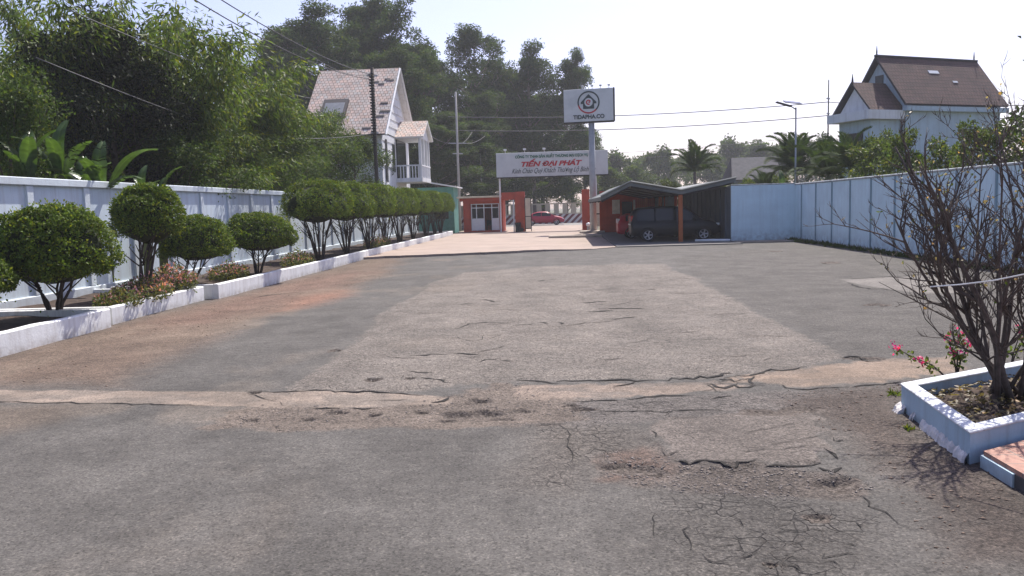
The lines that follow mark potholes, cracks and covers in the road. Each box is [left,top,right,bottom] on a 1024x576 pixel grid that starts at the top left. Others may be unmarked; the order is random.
crack [527,338,897,472]
crack [682,494,903,575]
pothole [595,463,631,476]
pothole [804,477,862,494]
pothole [608,464,671,478]
crack [247,271,652,409]
